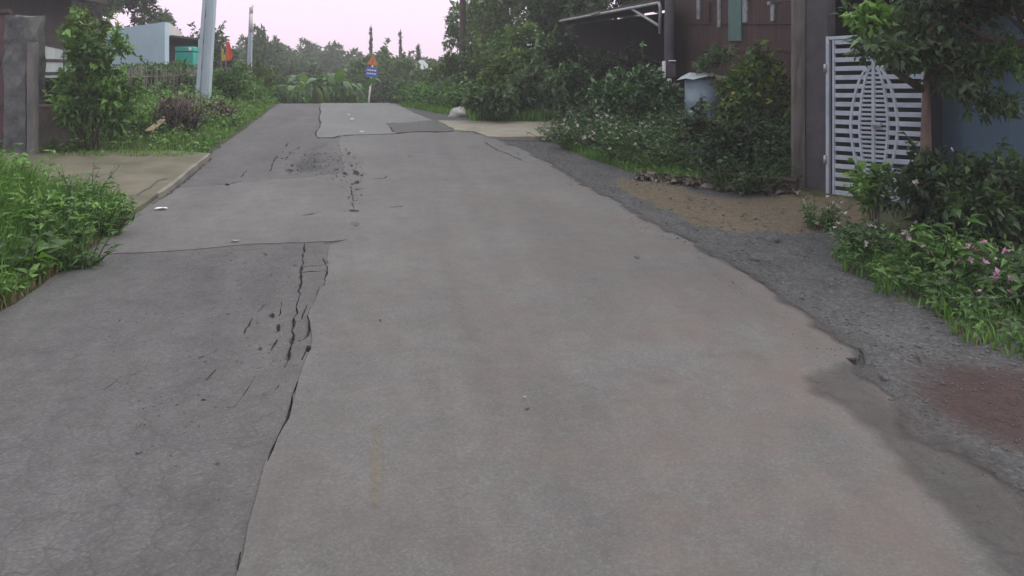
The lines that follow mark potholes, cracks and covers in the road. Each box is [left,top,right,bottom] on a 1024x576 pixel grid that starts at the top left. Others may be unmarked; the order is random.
crack [243,239,346,461]
